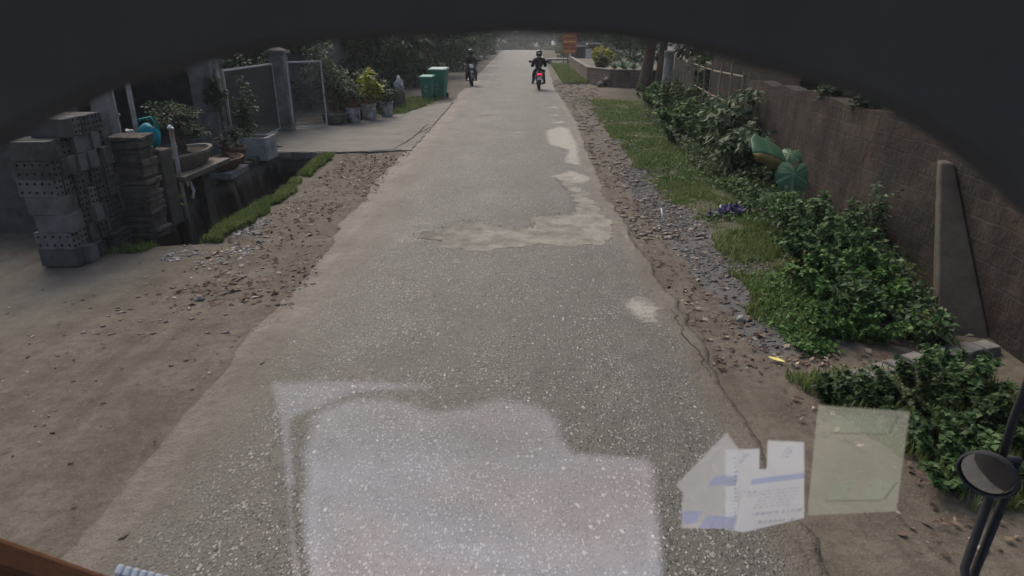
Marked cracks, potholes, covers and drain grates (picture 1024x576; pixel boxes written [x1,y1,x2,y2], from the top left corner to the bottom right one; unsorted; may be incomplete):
crack [672,311,711,376]
